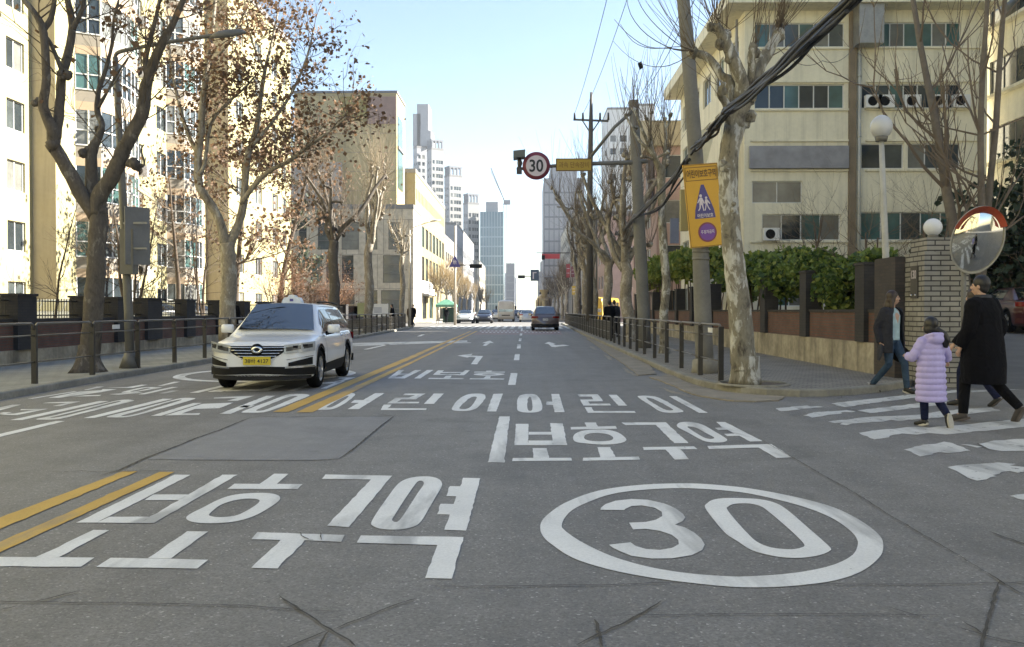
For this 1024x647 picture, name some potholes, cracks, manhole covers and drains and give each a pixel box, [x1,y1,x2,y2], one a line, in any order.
crack [438,581,1024,647]
crack [2,591,416,647]
